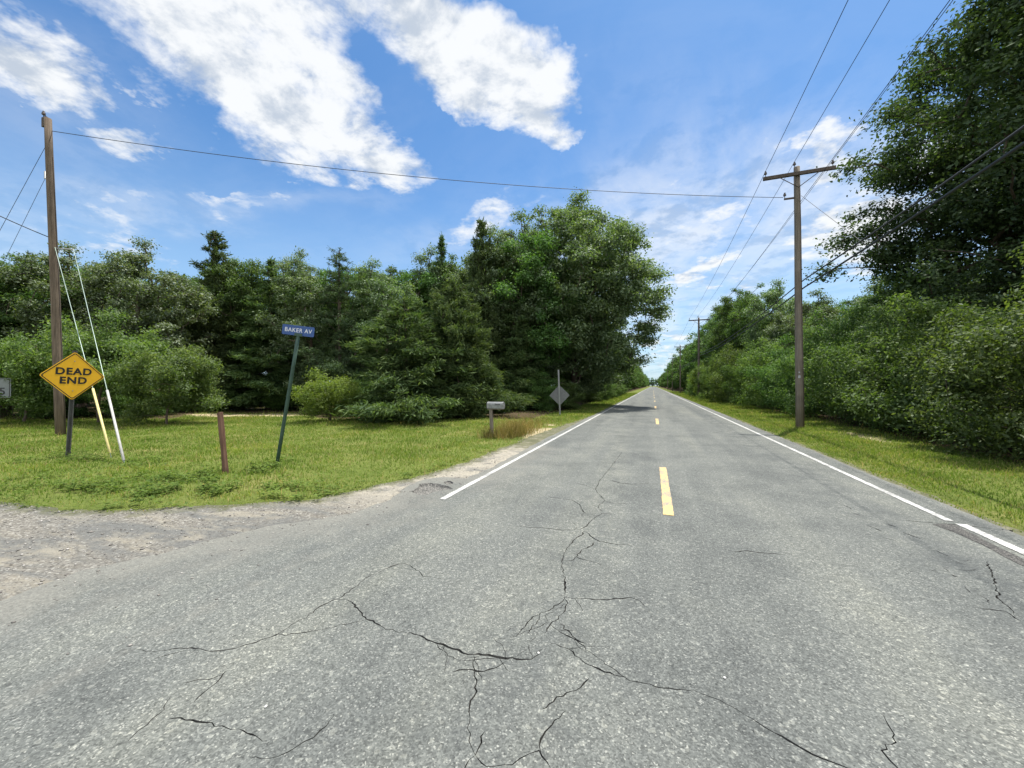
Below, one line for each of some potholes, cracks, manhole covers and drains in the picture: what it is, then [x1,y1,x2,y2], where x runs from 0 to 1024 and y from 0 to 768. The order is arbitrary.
crack [932,551,1018,620]
crack [881,715,898,768]
pothole [411,483,453,495]
crack [142,454,848,768]
